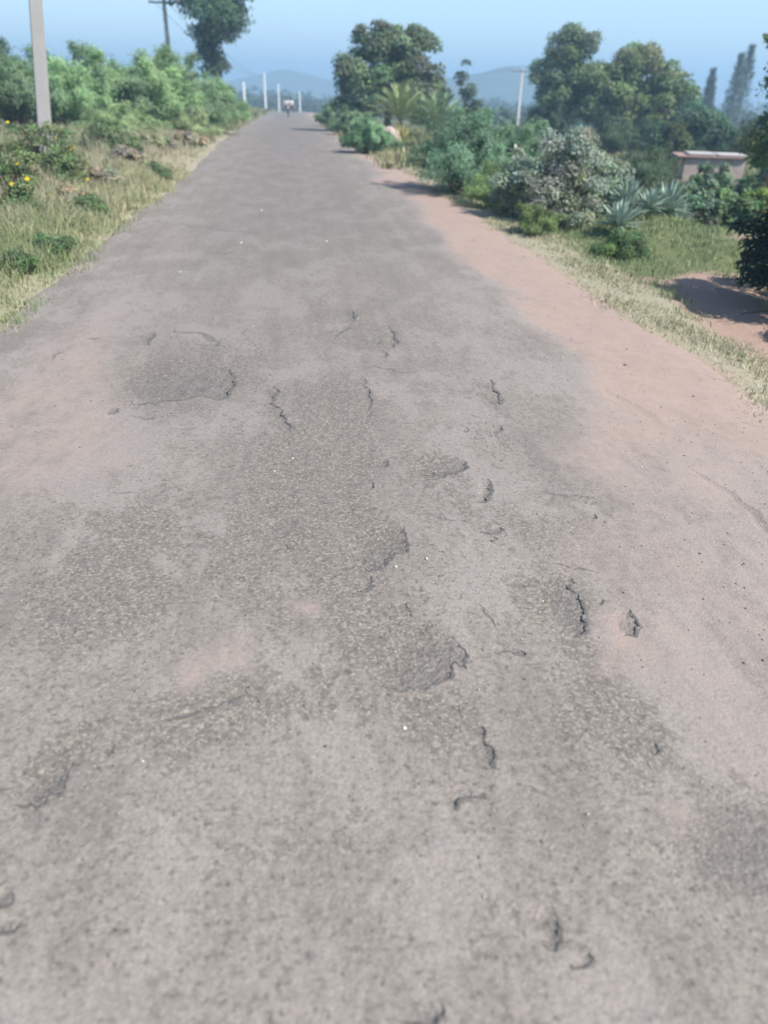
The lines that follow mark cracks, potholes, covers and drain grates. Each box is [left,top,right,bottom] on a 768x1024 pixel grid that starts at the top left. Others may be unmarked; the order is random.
pothole [520,571,590,637]
pothole [375,602,470,692]
pothole [411,454,470,478]
pothole [611,609,644,638]
pothole [349,523,410,572]
